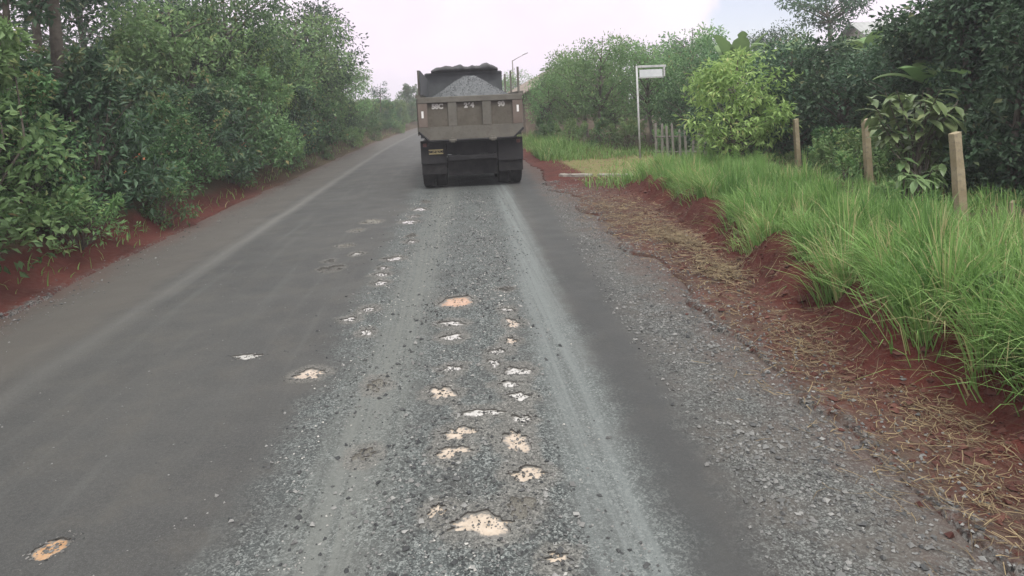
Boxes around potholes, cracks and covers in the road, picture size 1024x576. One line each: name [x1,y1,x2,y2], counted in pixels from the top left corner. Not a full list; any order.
pothole [432,421,488,444]
pothole [441,500,531,546]
pothole [283,364,329,383]
pothole [494,425,538,459]
pothole [537,547,578,565]
pothole [433,292,478,311]
pothole [503,316,523,329]
pothole [452,406,514,420]
pothole [497,363,538,377]
pothole [422,381,466,402]
pothole [21,530,85,568]
